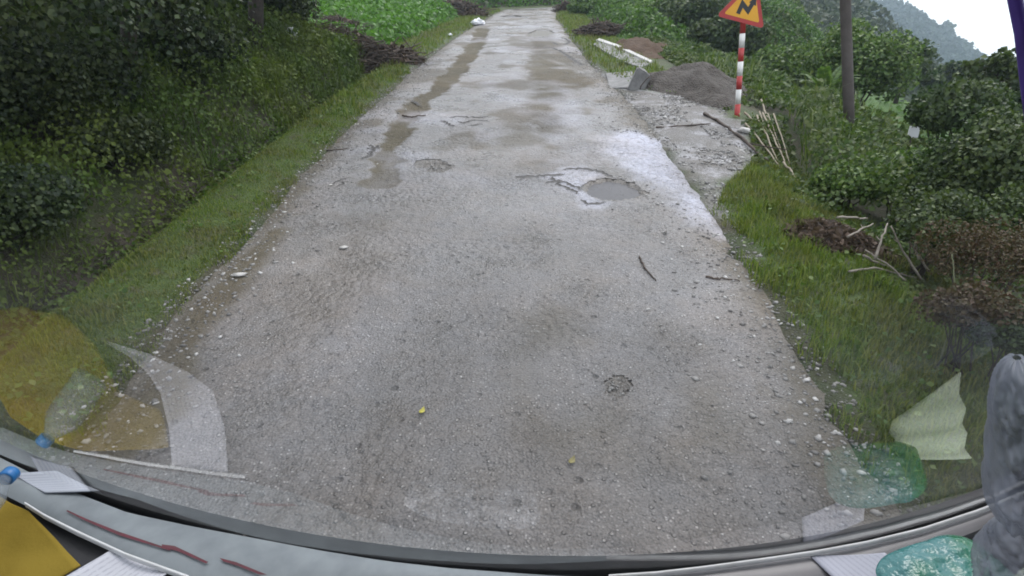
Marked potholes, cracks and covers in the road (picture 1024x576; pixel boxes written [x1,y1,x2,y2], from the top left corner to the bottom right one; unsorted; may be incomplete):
crack [516,167,615,204]
pothole [604,375,634,399]
pothole [580,178,650,201]
crack [443,116,488,127]
pothole [414,159,455,173]
